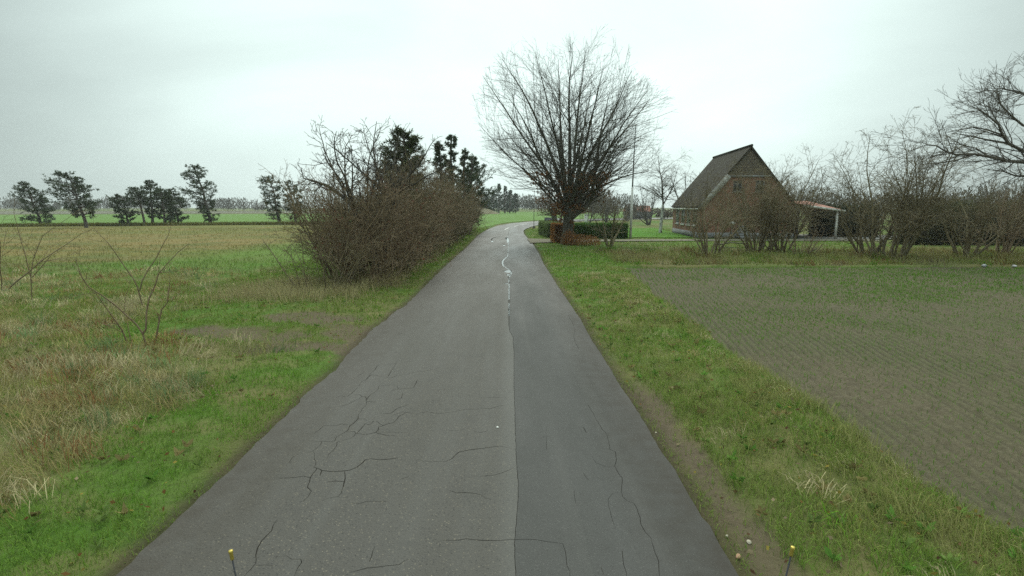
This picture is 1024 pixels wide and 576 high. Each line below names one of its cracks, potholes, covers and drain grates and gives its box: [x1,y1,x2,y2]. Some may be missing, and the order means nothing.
crack [289,367,502,504]
crack [438,539,570,571]
crack [245,520,302,575]
crack [583,407,659,568]
